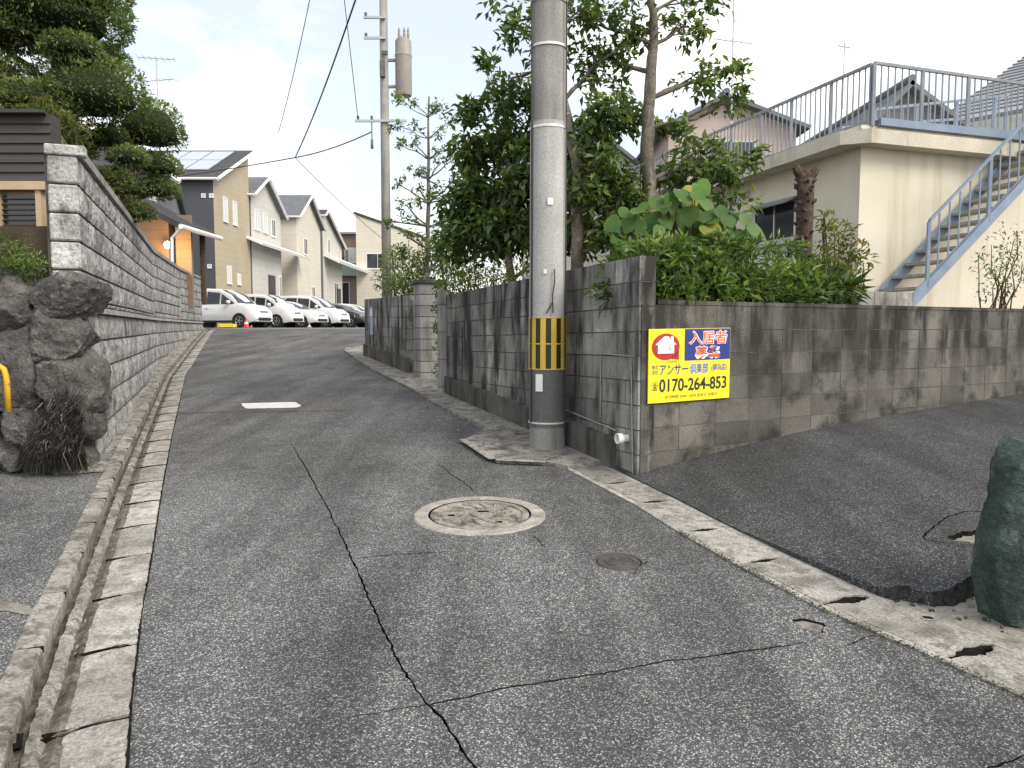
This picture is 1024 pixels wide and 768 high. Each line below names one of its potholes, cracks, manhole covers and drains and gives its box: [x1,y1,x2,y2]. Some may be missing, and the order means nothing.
crack [922,511,981,543]
manhole cover [413,496,546,536]
manhole cover [593,553,645,571]
pothole [793,618,825,633]
crack [292,445,809,768]
pothole [877,576,1024,651]
